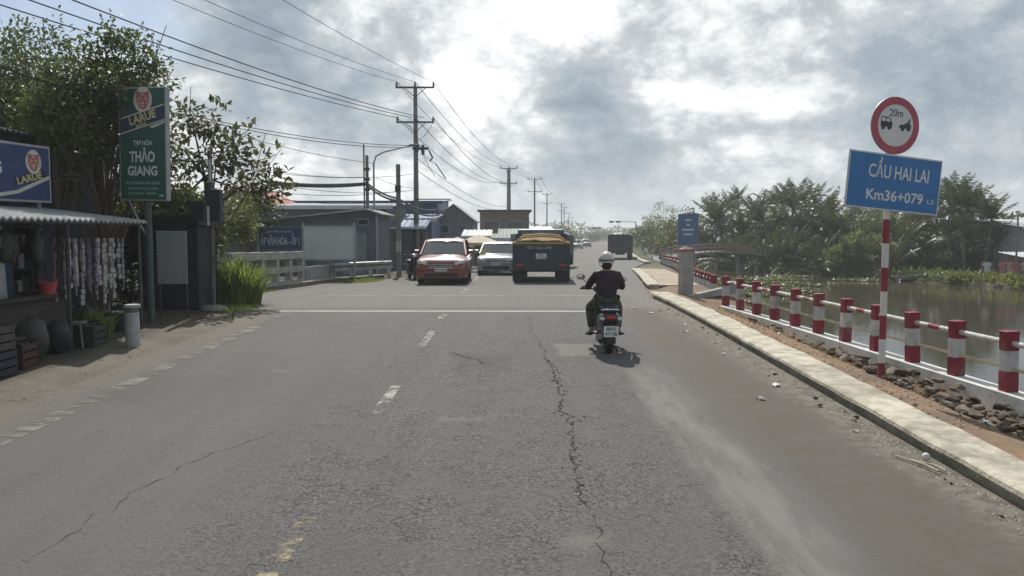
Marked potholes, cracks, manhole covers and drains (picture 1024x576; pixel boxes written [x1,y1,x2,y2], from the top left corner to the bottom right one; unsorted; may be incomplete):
crack [528,320,611,576]
crack [23,436,264,561]
